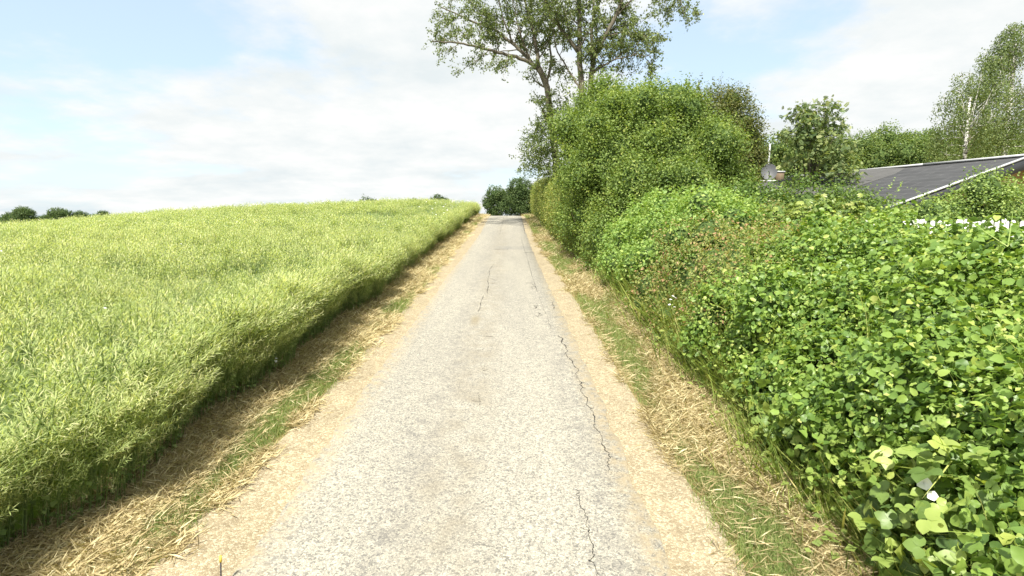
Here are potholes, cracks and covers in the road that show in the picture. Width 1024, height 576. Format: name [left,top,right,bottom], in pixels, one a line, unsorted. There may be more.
crack [577,490,598,575]
crack [521,218,611,471]
